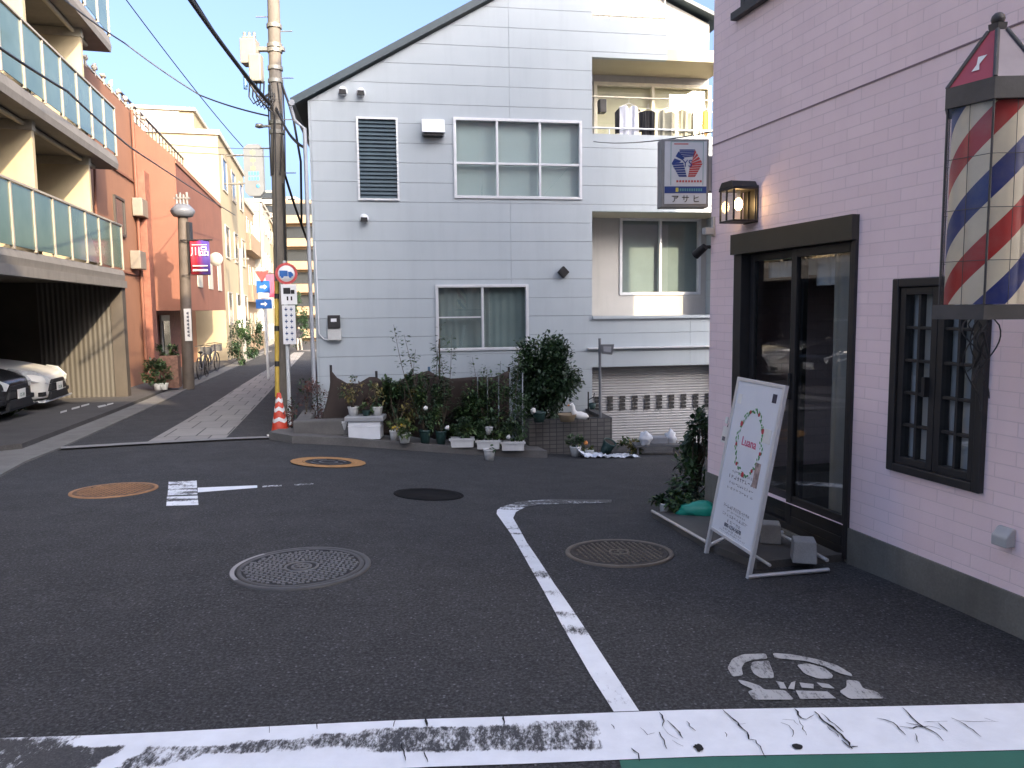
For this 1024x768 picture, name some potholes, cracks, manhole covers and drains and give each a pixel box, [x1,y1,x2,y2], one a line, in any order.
crack [611,712,696,761]
manhole cover [290,457,366,467]
manhole cover [229,547,371,591]
crack [783,708,858,749]
manhole cover [68,482,159,499]
crack [879,708,998,742]
crack [723,710,766,758]
manhole cover [565,539,674,568]
